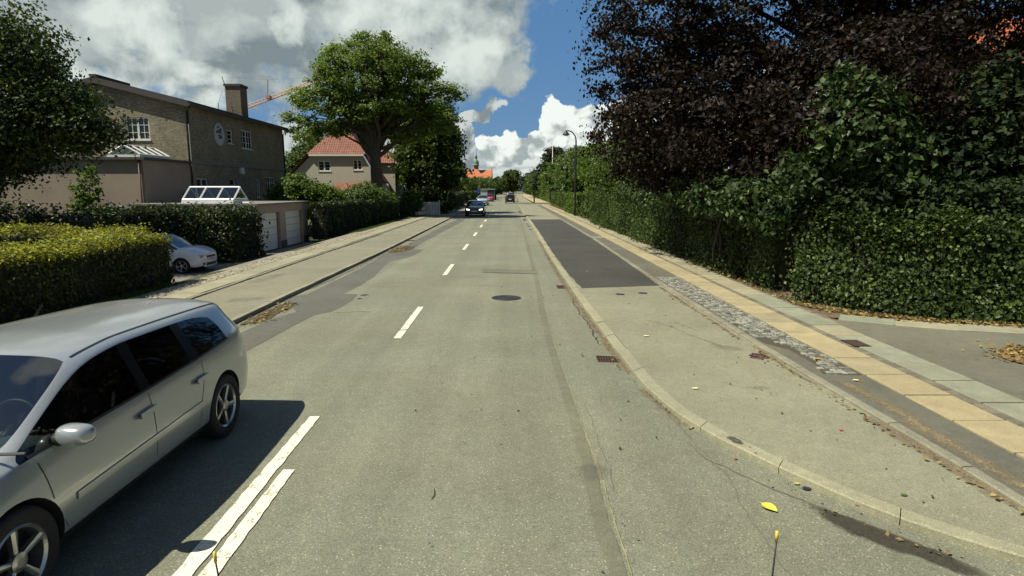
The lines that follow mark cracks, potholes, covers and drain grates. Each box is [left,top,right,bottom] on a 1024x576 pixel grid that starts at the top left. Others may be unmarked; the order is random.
crack [652,398,803,576]
drain grate [595,355,620,363]
